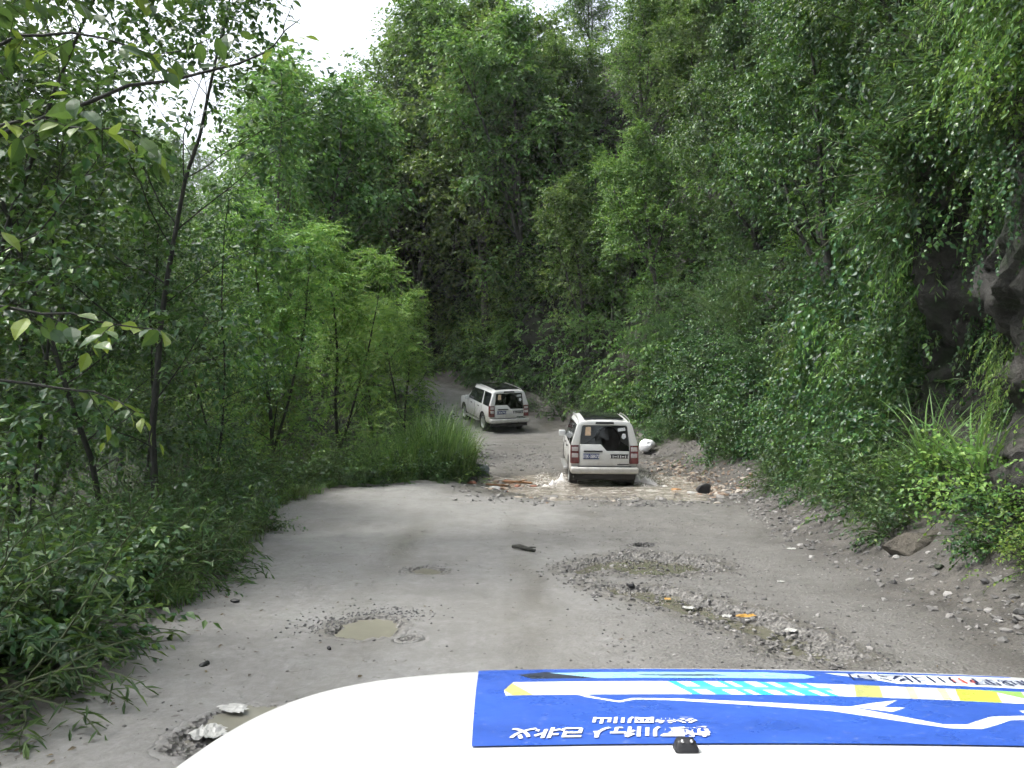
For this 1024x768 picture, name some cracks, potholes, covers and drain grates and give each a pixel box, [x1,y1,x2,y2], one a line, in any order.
pothole [275,604,454,647]
pothole [385,564,459,575]
pothole [547,573,941,673]
pothole [134,696,287,765]
pothole [523,547,774,584]
